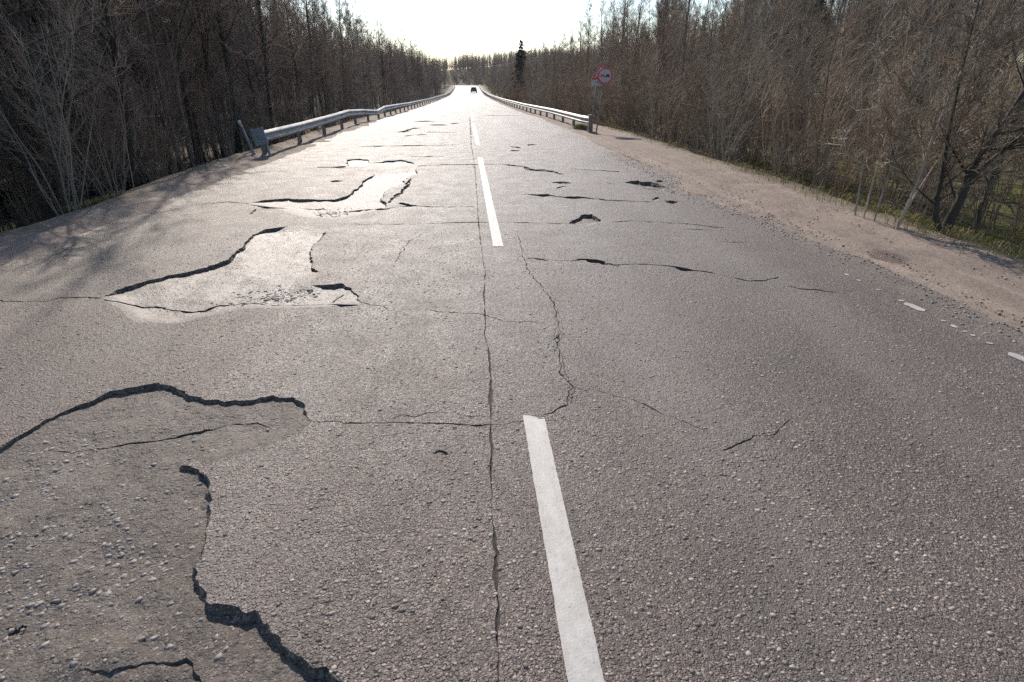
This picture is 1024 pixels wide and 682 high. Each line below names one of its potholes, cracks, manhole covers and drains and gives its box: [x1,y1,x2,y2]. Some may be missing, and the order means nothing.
pothole [625,180,667,191]
pothole [250,168,418,219]
pothole [570,214,601,226]
